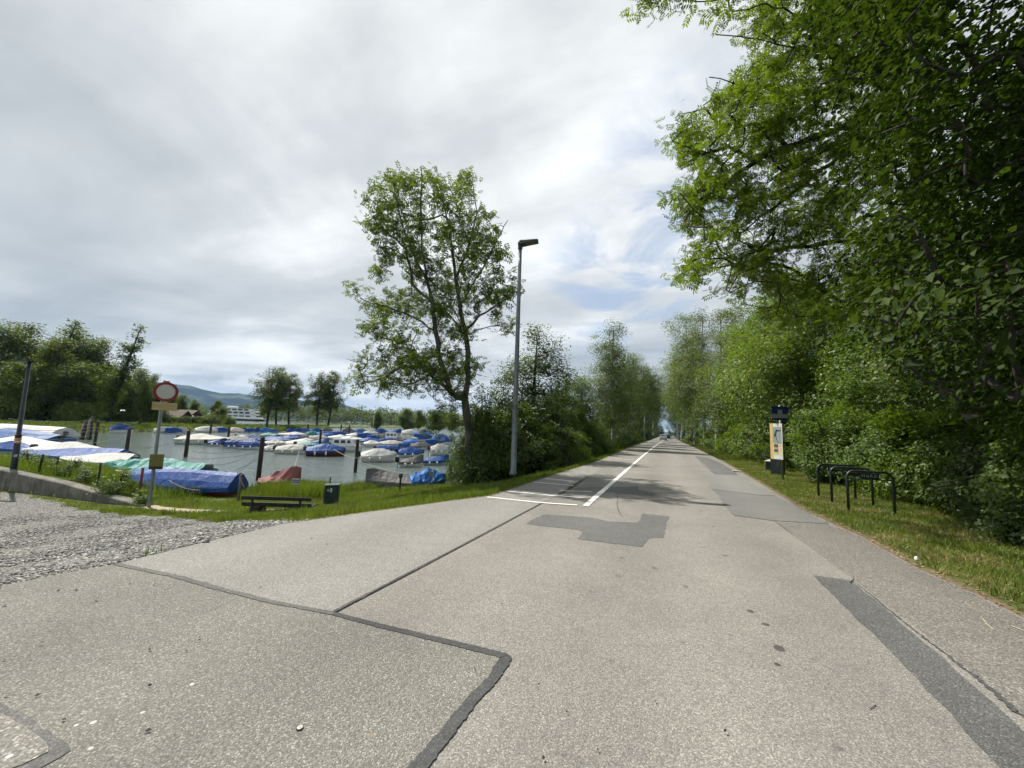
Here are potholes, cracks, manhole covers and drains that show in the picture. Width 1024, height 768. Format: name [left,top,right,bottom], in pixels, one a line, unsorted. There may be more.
crack [849,578,1024,718]
